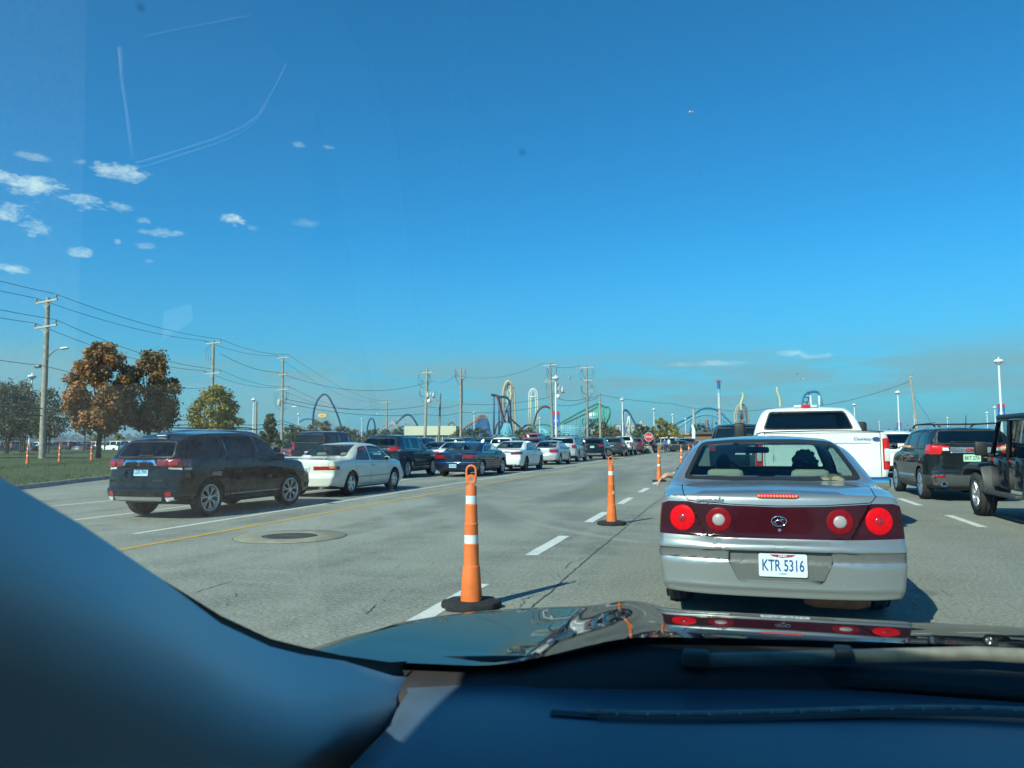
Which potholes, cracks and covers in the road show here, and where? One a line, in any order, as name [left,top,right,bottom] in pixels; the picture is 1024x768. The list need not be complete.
manhole cover [232,530,347,544]
crack [519,499,660,608]
